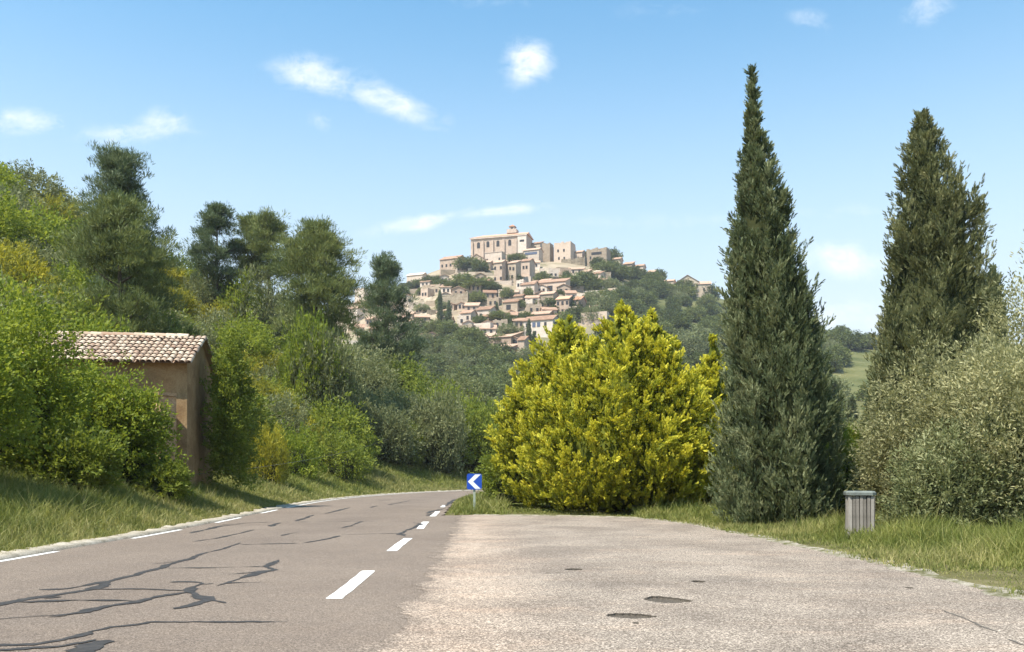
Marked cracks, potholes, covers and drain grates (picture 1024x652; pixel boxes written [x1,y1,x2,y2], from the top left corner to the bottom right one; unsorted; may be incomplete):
crack [943,610,1024,645]
